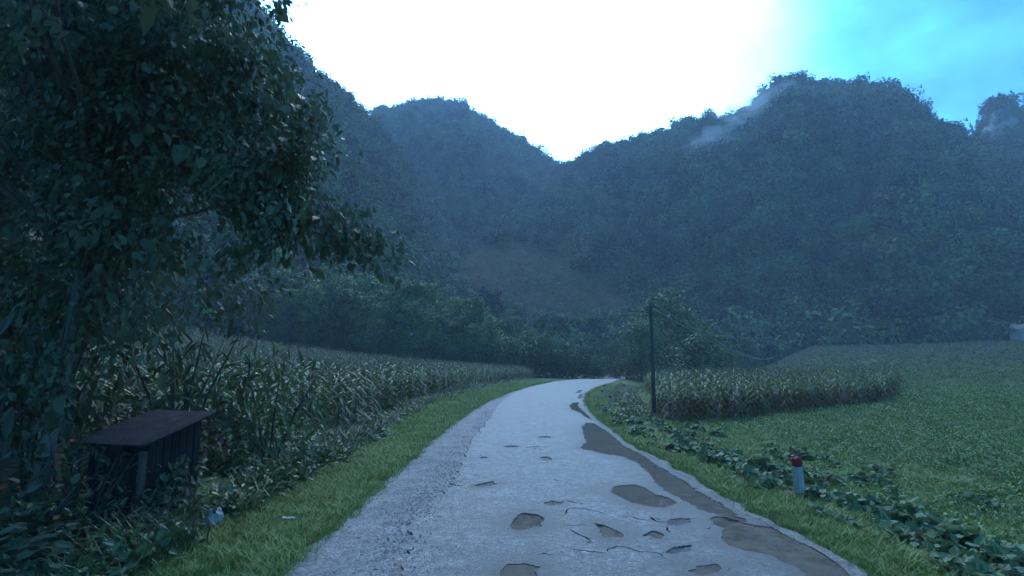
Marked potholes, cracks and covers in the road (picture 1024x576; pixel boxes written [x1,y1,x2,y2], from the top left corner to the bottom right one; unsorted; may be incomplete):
pothole [510,513,544,530]
pothole [594,523,624,537]
pothole [666,545,692,554]
pothole [667,518,691,526]
pothole [643,530,664,539]
pothole [500,563,541,576]
pothole [569,402,592,420]
crack [564,500,661,555]
